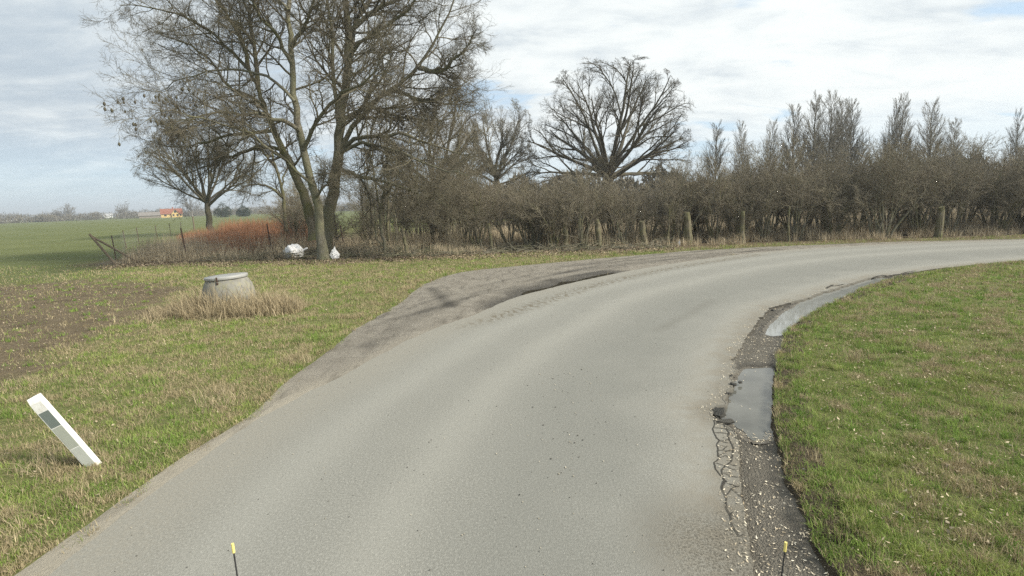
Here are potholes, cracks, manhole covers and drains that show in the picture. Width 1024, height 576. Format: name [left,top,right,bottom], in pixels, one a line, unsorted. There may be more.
pothole [709,364,775,444]
crack [712,415,745,536]
